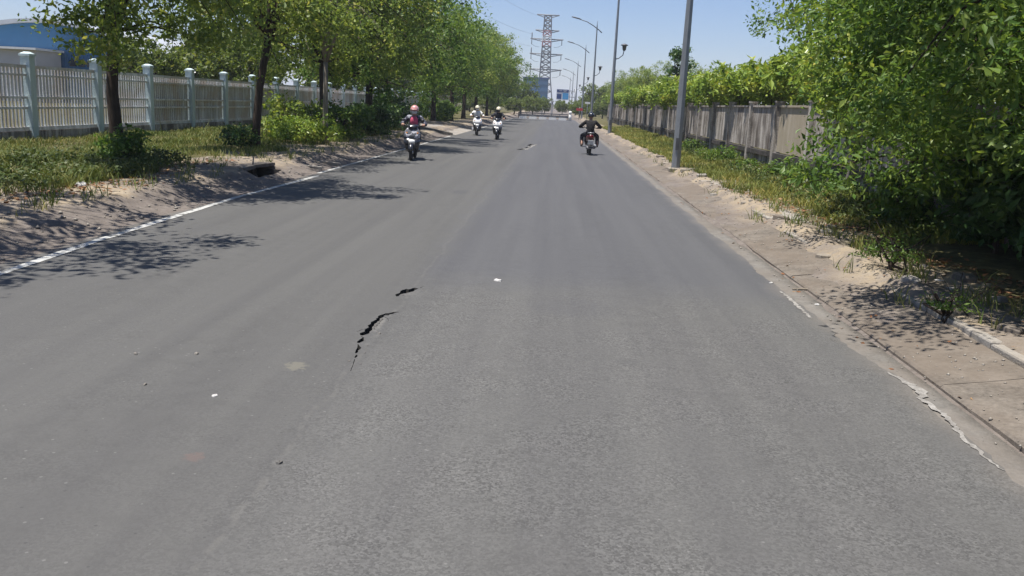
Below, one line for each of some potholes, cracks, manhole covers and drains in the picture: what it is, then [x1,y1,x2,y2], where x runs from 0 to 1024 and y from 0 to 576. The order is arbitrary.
drain grate [231,157,281,177]
crack [348,287,424,369]
